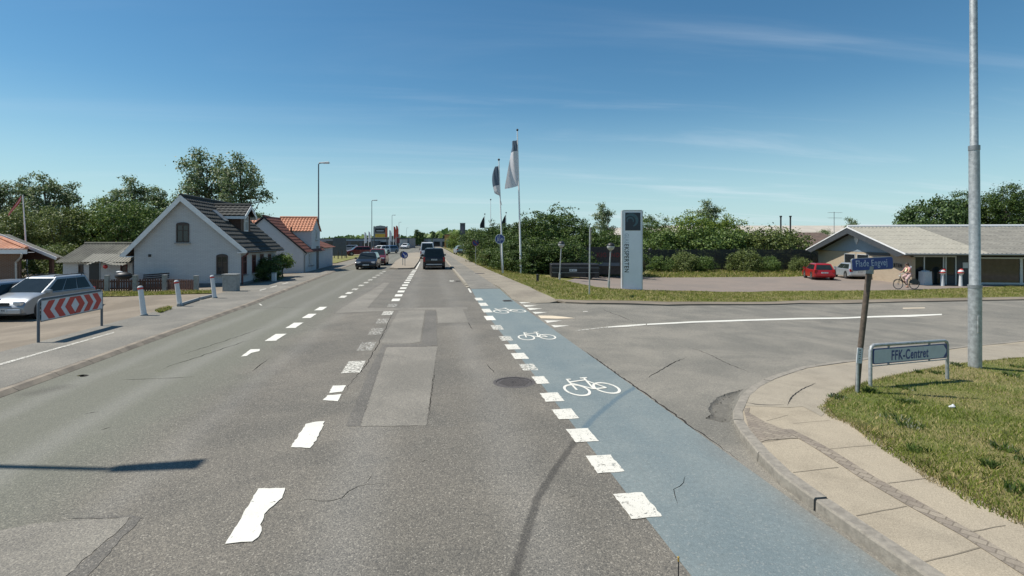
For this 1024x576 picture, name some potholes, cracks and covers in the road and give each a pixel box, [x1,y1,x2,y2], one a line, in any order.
crack [126,326,267,380]
manhole cover [493,377,535,388]
crack [587,352,737,459]
pothole [707,389,743,423]
